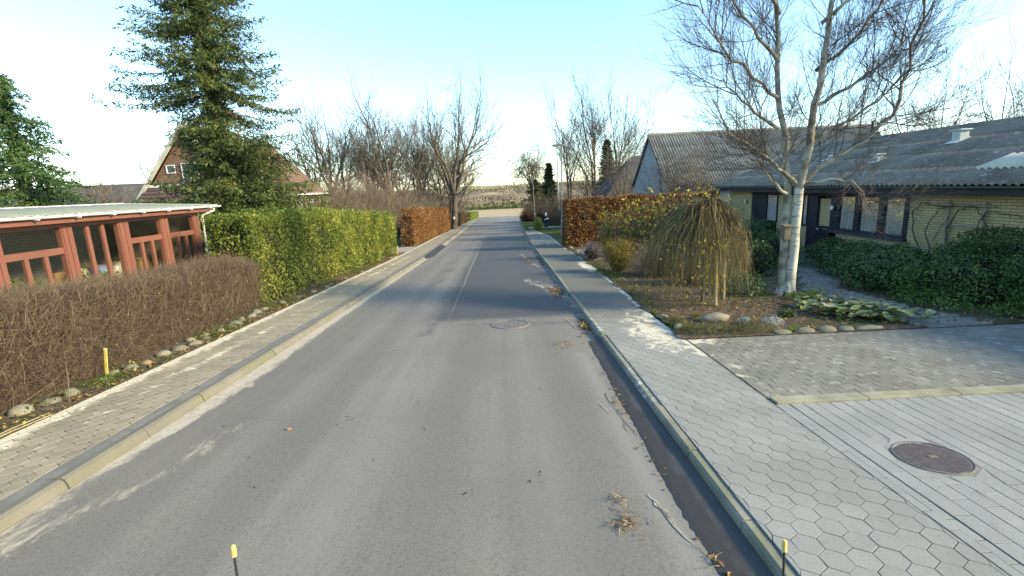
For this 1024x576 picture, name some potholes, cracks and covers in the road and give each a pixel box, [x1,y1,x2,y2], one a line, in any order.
manhole cover [890,441,977,475]
crack [648,495,695,545]
manhole cover [491,319,530,329]
